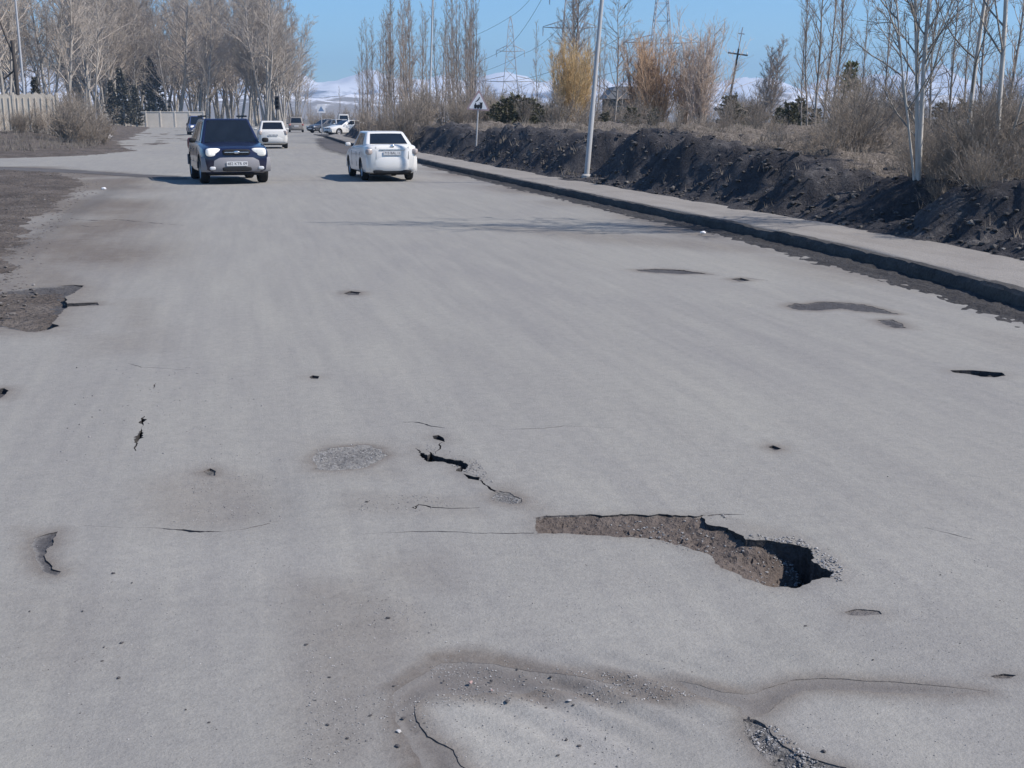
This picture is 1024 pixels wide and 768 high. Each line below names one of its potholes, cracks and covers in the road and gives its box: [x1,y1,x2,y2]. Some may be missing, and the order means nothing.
crack [84,523,270,533]
pothole [535,514,834,588]
pothole [30,531,61,576]
pothole [743,719,846,768]
crack [412,480,496,509]
pothole [786,302,897,314]
pothole [0,285,99,330]
crack [134,416,147,451]
pothole [877,320,905,328]
